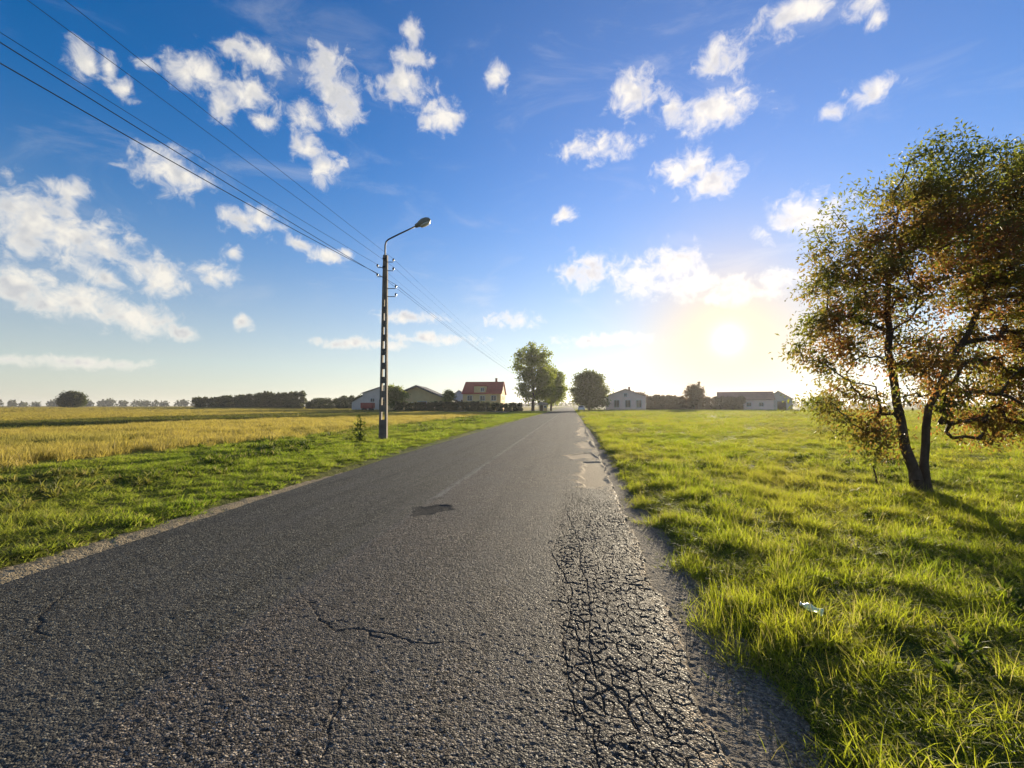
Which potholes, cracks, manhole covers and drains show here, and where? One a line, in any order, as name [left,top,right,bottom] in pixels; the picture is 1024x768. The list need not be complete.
crack [315,679,350,766]
pothole [409,504,456,517]
crack [33,596,64,641]
crack [296,602,460,645]
